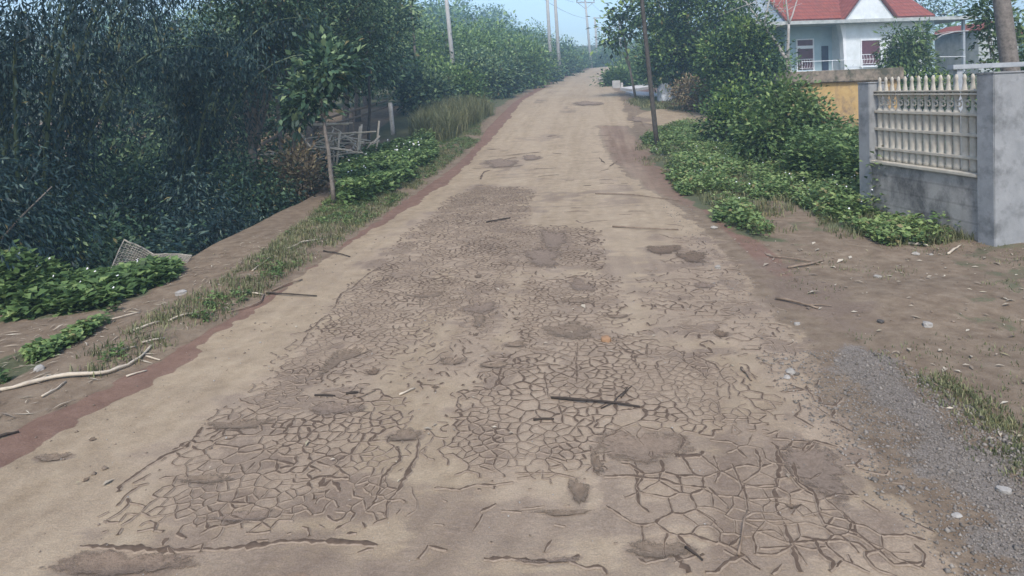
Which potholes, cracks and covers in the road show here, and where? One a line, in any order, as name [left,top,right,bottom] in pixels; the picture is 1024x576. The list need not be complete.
pothole [592,429,696,464]
pothole [568,479,589,504]
crack [79,128,945,576]
pothole [522,248,563,267]
pothole [485,159,519,168]
pothole [540,229,568,250]
pothole [647,245,681,255]
pothole [676,250,706,263]
